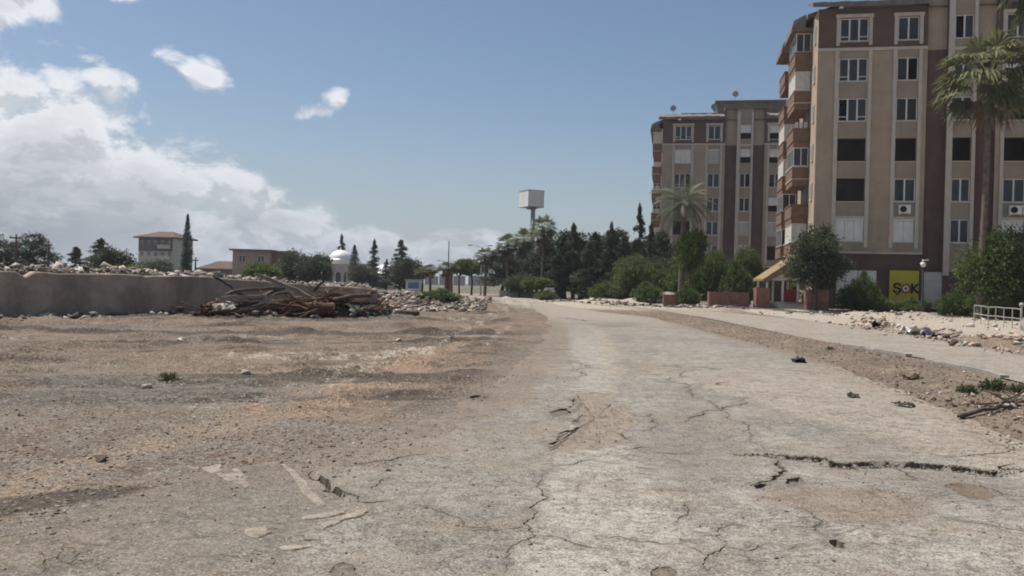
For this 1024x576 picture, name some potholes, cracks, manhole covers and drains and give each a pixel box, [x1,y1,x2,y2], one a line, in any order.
crack [308,453,426,503]
pothole [829,539,846,548]
crack [432,460,673,570]
crack [750,441,1024,497]
crack [653,367,765,452]
